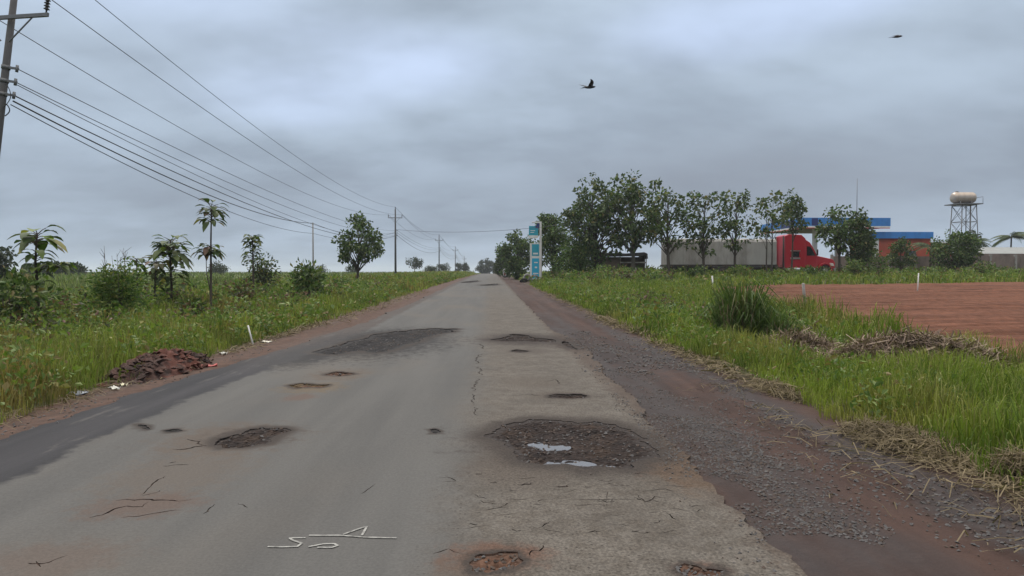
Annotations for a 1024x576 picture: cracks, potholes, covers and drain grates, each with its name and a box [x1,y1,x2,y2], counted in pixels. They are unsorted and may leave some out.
crack [466,472,701,556]
pothole [491,334,556,342]
crack [90,439,207,518]
pothole [675,563,725,576]
pothole [484,419,661,470]
pothole [311,328,456,355]
crack [471,344,484,415]
pothole [214,427,291,448]
pothole [469,551,524,573]
